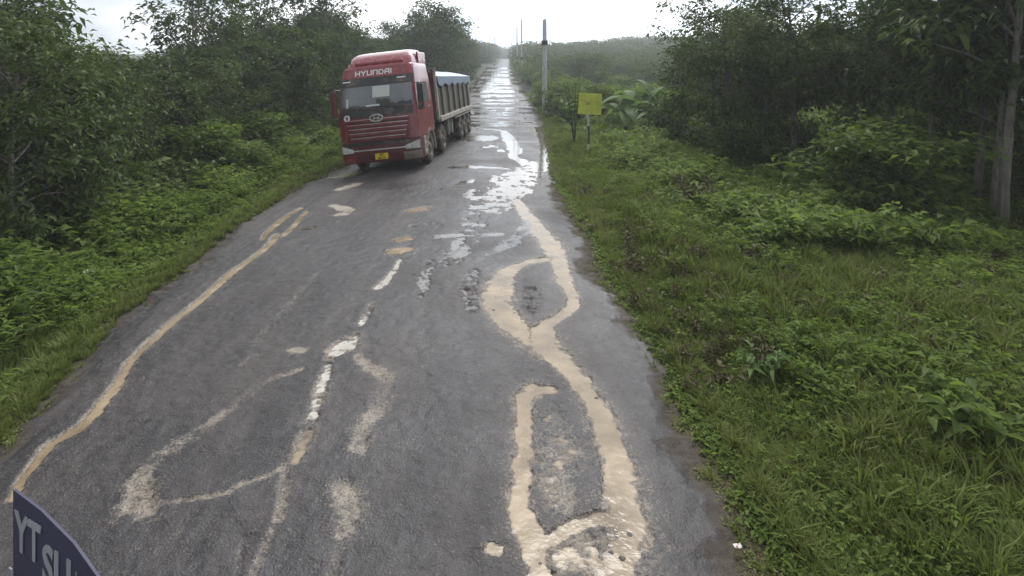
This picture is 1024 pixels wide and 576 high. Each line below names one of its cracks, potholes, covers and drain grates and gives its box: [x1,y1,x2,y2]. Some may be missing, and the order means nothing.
pothole [534,405,588,516]
pothole [520,284,548,315]
pothole [476,144,509,153]
pothole [415,259,438,298]
pothole [457,267,483,314]
